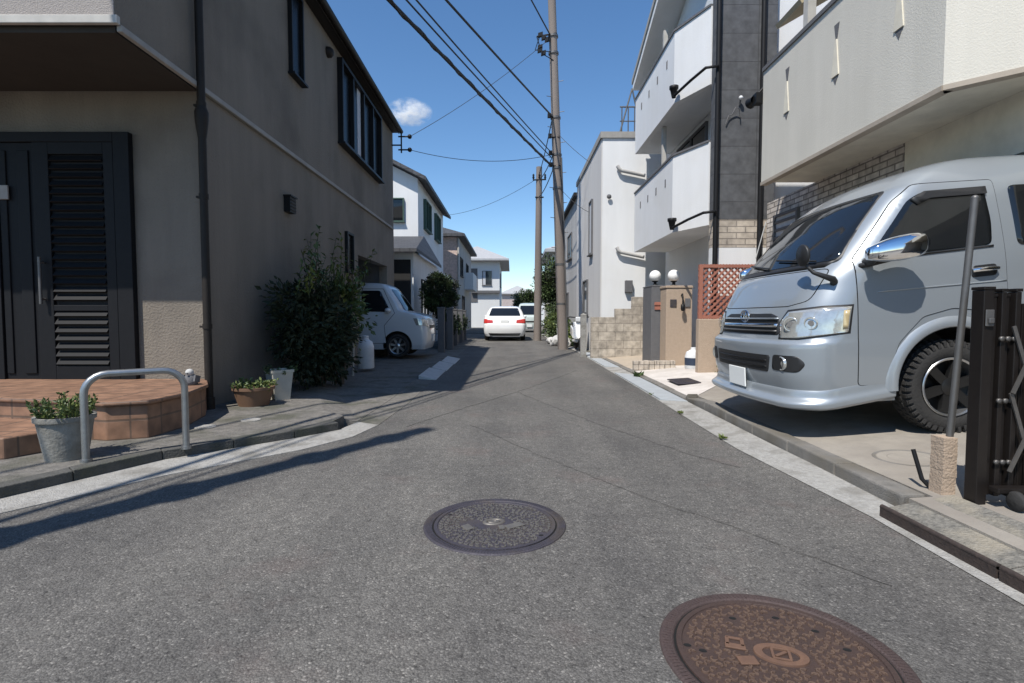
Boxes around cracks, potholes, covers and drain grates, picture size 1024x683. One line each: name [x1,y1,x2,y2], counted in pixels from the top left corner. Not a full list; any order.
manhole cover [871,450,931,467]
manhole cover [659,594,922,683]
manhole cover [423,499,566,556]
